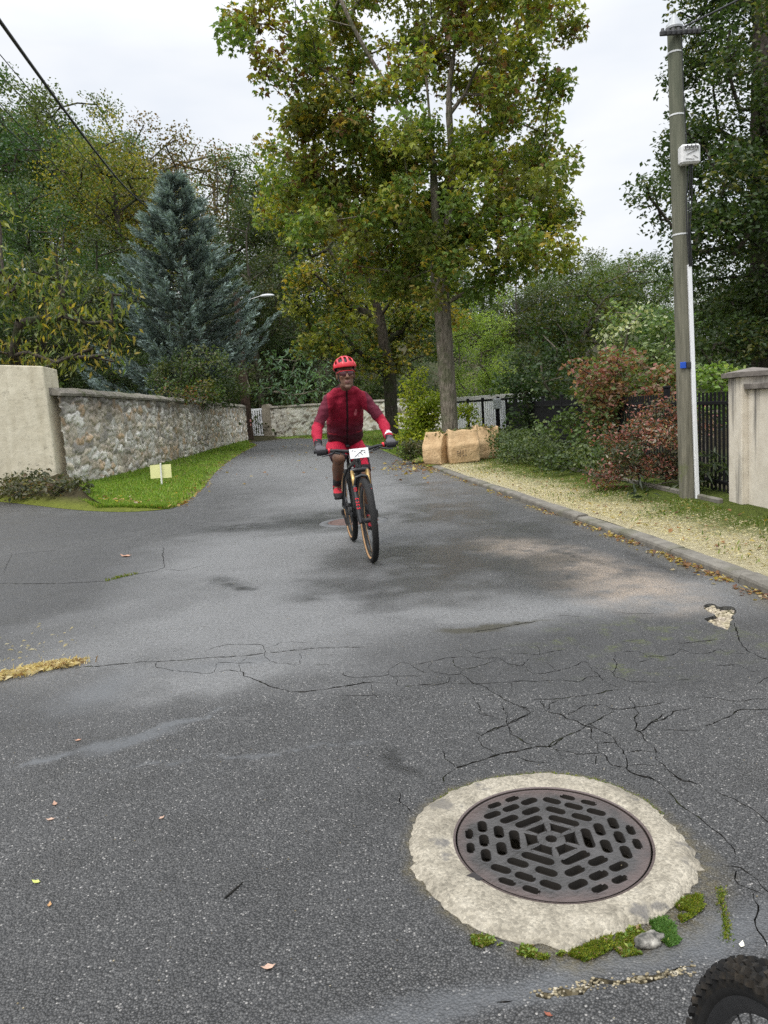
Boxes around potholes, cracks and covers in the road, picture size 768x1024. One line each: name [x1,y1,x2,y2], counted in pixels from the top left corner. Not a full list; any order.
crack [3,548,195,584]
crack [81,642,377,697]
pothole [704,604,736,629]
crack [729,866,768,947]
crack [377,640,768,858]
